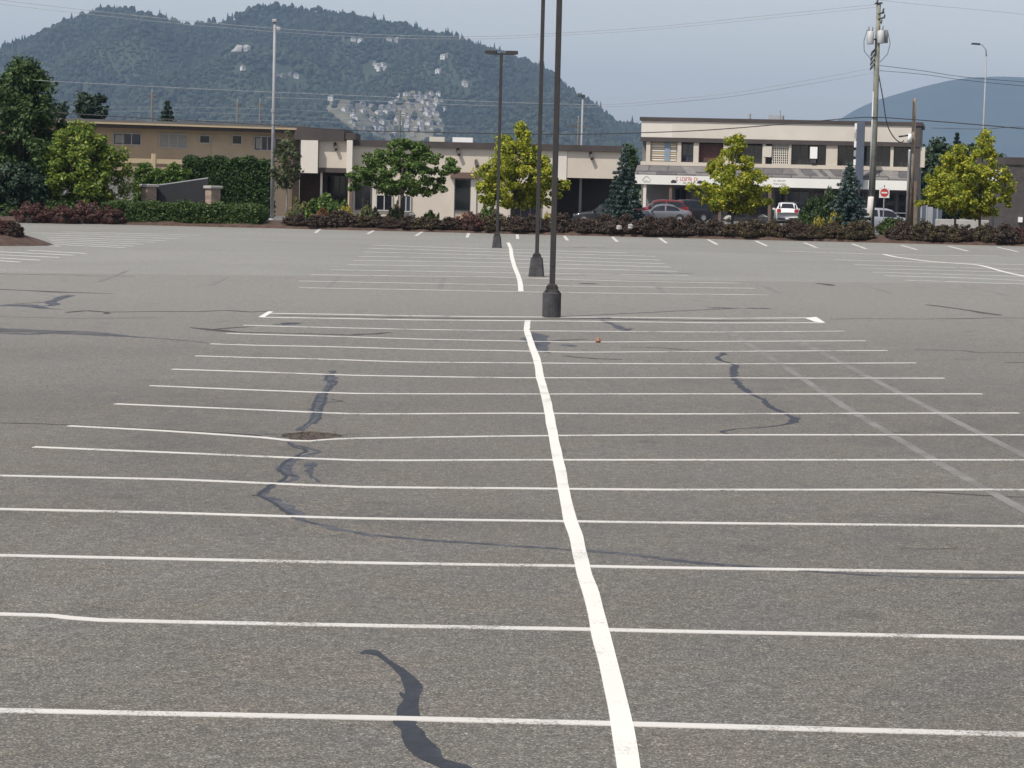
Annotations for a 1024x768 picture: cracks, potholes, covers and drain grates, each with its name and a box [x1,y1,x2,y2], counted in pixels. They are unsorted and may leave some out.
crack [830,304,1001,320]
crack [66,310,788,360]
